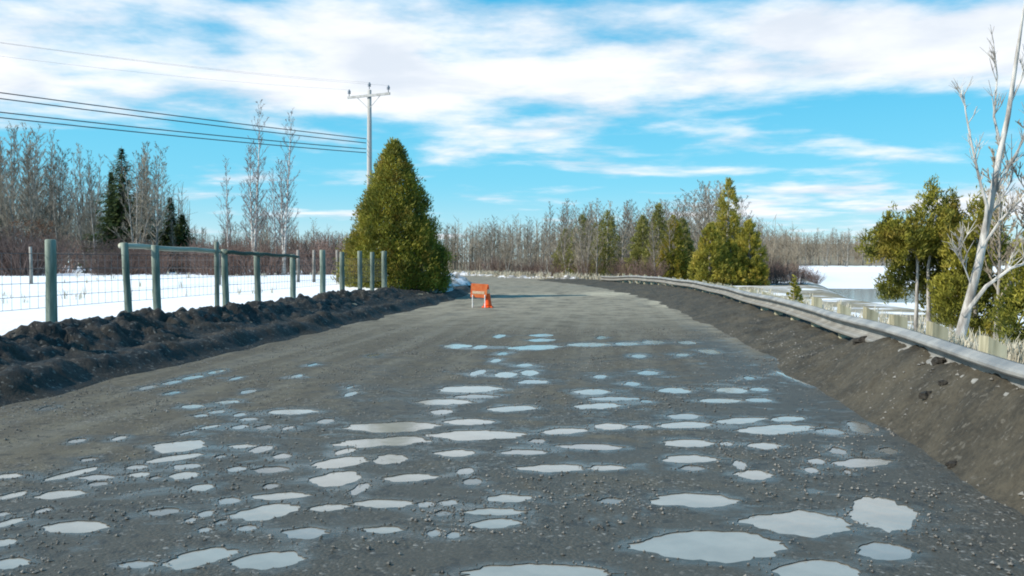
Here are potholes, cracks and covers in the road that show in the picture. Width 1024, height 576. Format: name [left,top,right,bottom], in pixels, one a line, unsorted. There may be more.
pothole [649,492,741,508]
pothole [308,470,362,487]
pothole [342,421,443,432]
pothole [422,430,528,441]
pothole [40,520,111,533]
pothole [737,509,854,538]
pothole [510,464,585,472]
pothole [467,518,524,529]
pothole [151,439,207,453]
pothole [225,503,301,521]
pothole [460,563,622,576]
pothole [733,469,774,480]
